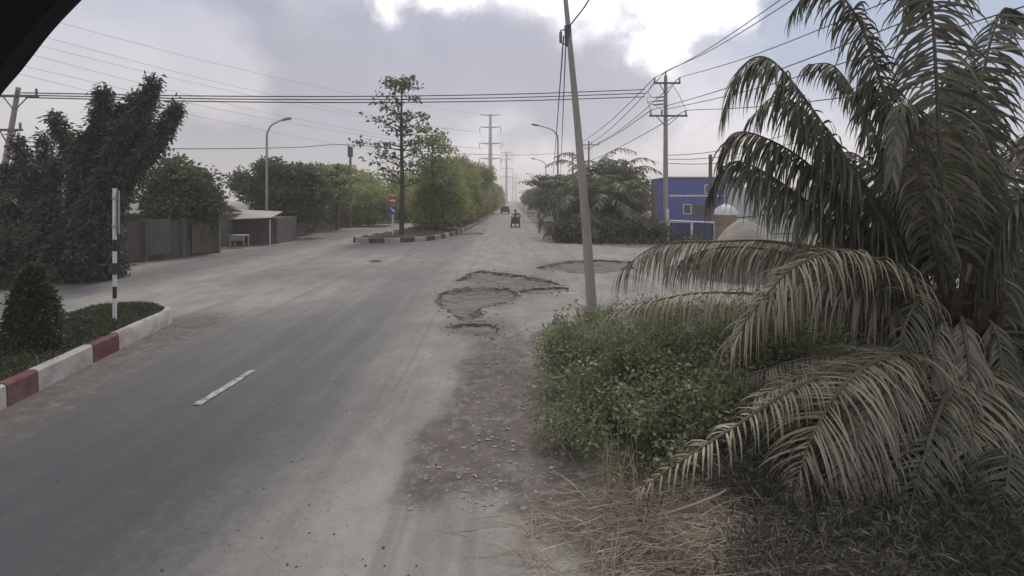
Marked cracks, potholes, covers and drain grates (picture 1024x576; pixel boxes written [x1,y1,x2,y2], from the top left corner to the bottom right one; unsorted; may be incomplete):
pothole [448,323,500,335]
pothole [434,287,522,322]
pothole [519,286,570,294]
pothole [456,270,559,286]
pothole [534,260,635,273]
